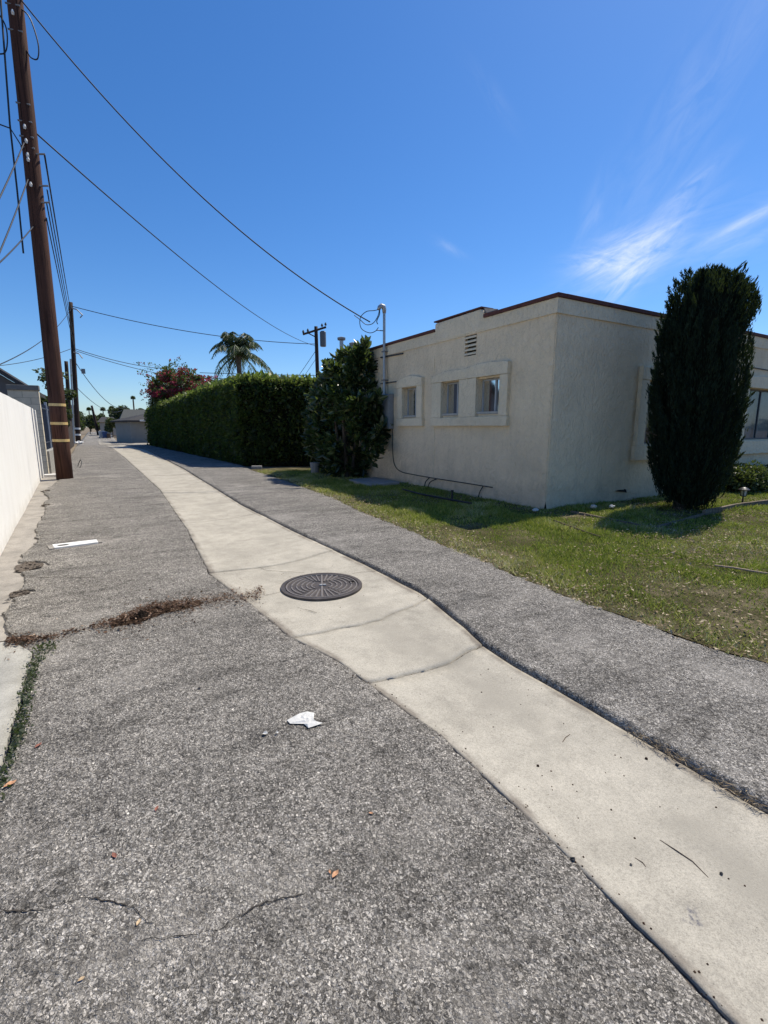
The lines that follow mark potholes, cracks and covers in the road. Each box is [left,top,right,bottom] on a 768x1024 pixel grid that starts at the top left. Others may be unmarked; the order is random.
crack [0,893,305,941]
manhole cover [281,573,362,601]
